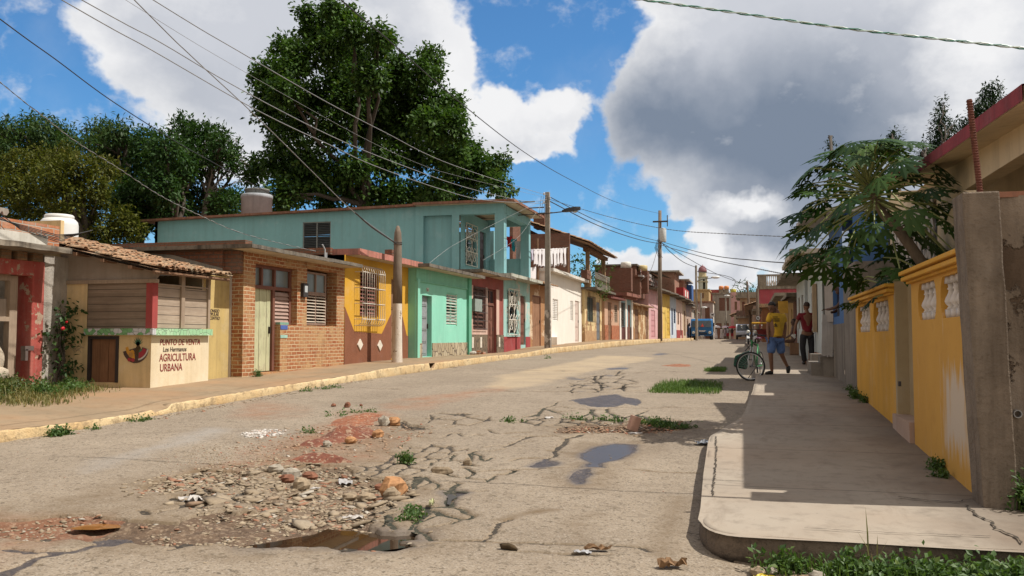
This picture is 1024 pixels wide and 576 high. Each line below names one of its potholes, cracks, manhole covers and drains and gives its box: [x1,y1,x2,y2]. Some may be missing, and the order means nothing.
pothole [580,444,637,468]
crack [0,539,133,576]
pothole [569,394,641,407]
pothole [0,466,398,551]
crack [353,371,675,547]
pothole [569,468,592,484]
